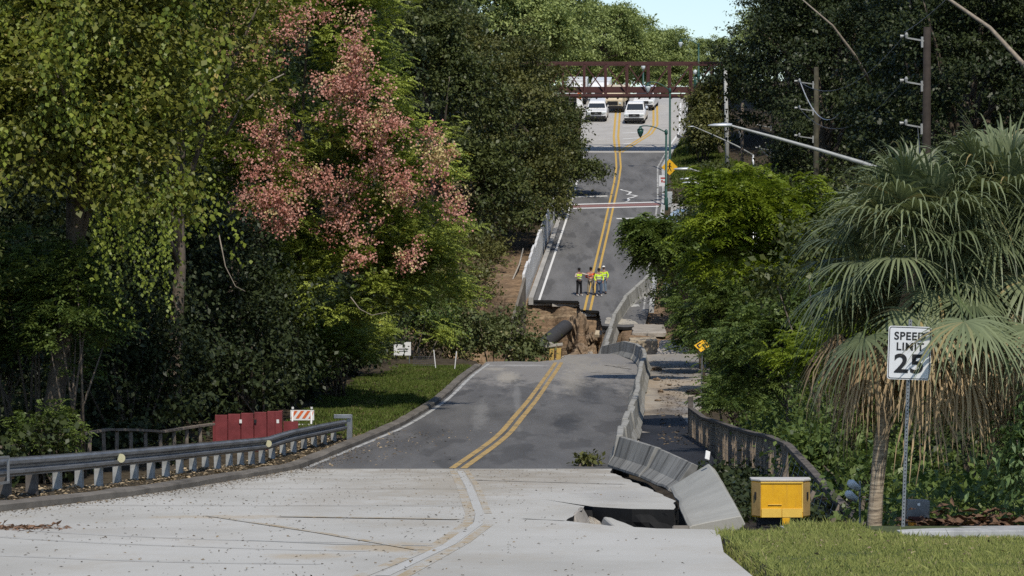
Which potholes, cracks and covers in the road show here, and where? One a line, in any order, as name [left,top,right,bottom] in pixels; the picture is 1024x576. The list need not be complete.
pothole [585,504,679,529]
